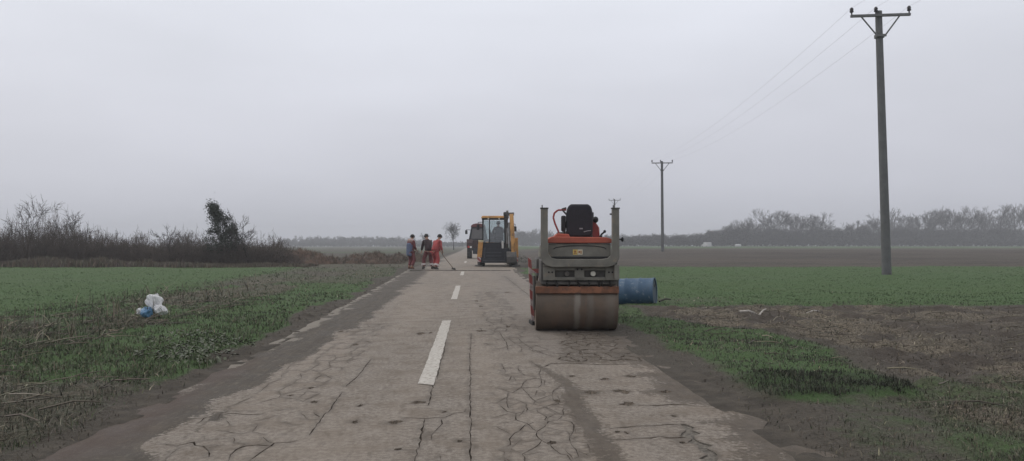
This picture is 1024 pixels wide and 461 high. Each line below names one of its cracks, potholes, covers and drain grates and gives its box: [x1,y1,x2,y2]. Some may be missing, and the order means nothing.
crack [165,325,383,461]
crack [619,424,718,461]
crack [407,296,642,461]
